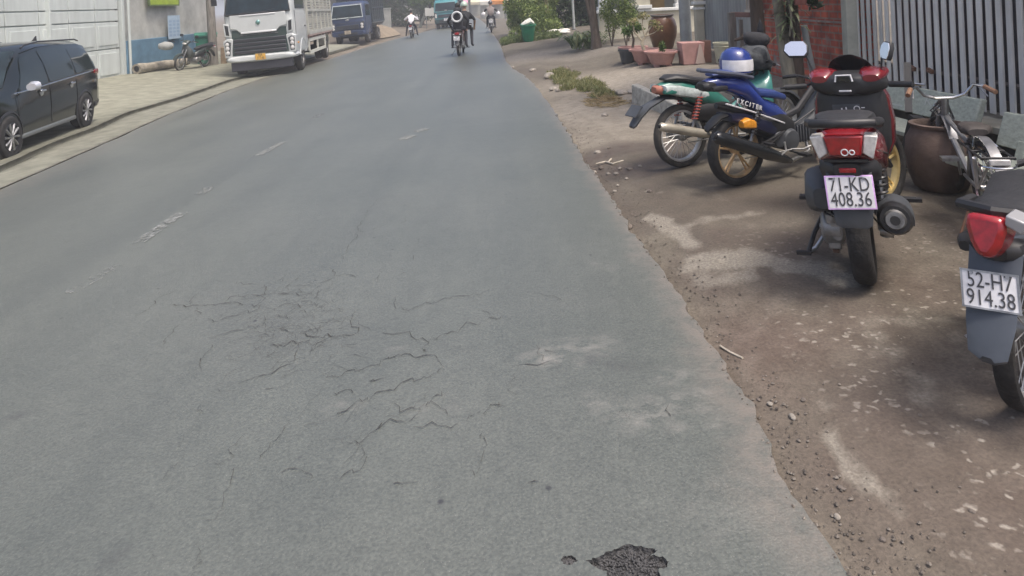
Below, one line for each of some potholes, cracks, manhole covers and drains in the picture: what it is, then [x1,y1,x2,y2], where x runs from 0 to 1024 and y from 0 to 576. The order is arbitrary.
pothole [561,555,577,565]
pothole [587,544,668,576]
crack [276,291,560,477]
crack [142,221,405,391]
